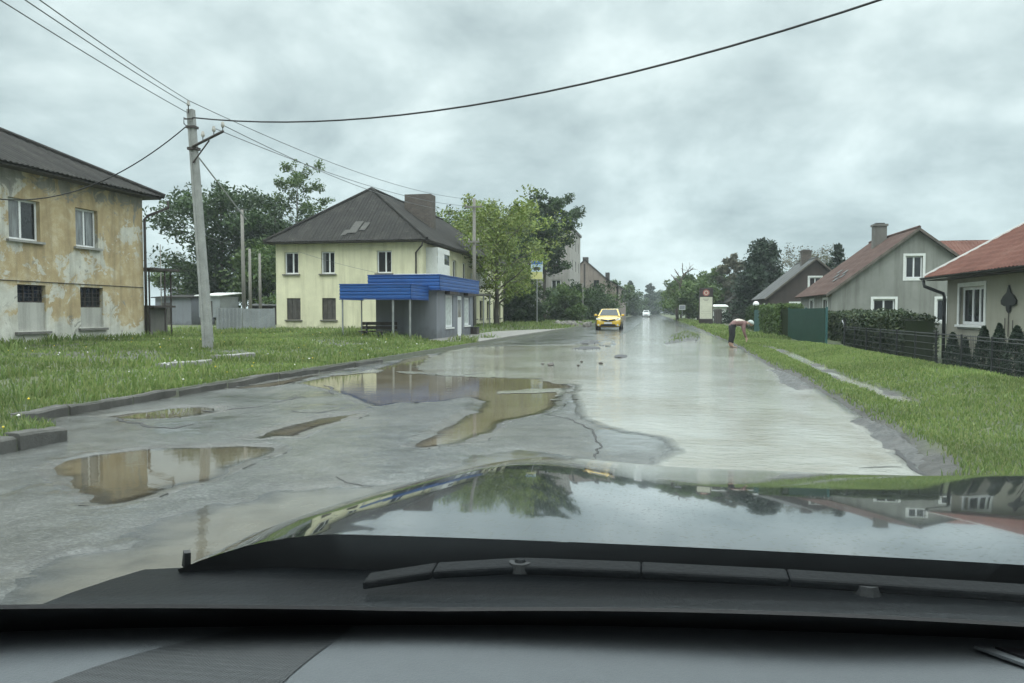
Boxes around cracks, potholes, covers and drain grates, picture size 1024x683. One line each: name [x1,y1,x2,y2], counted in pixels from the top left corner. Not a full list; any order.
crack [537,412,603,458]
pothole [32,441,292,508]
pothole [235,409,373,440]
pothole [85,404,229,420]
pothole [286,354,580,449]
